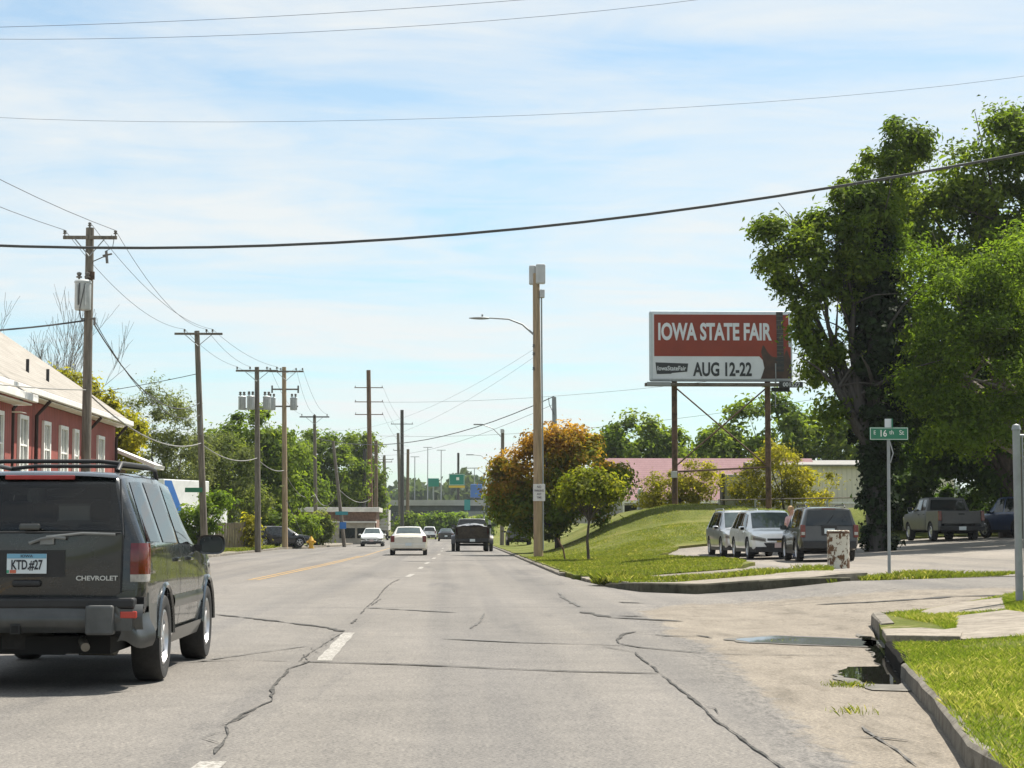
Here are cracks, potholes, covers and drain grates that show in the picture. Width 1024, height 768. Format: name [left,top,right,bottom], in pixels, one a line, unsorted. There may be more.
crack [860,726,916,765]
crack [179,580,786,768]
